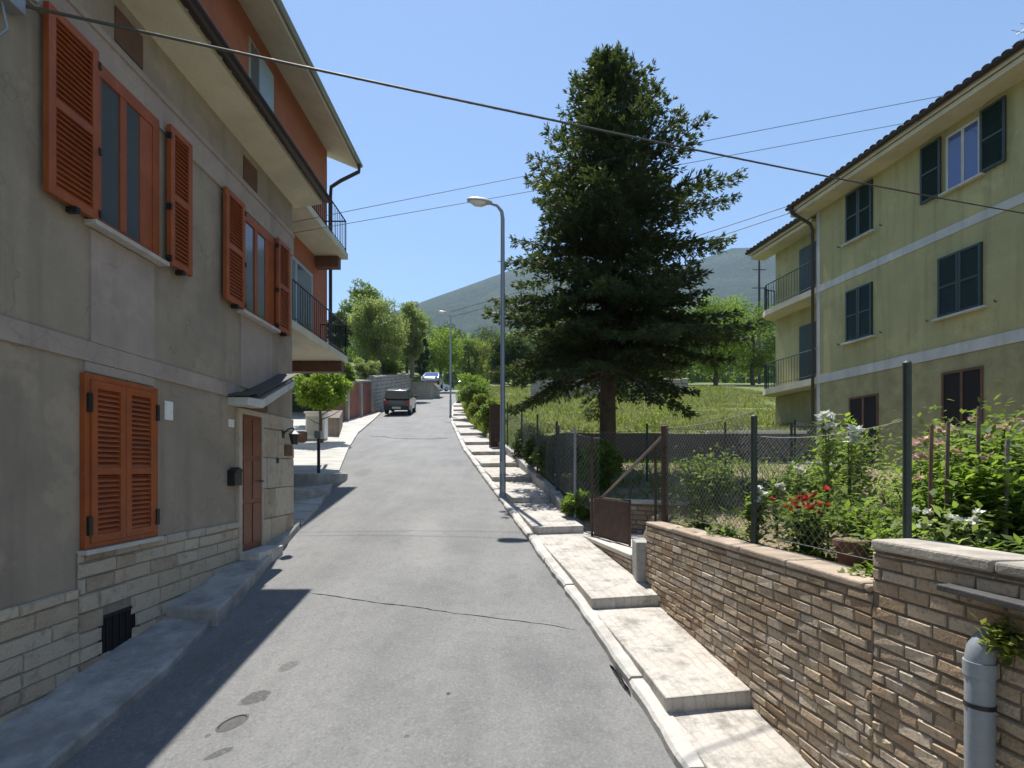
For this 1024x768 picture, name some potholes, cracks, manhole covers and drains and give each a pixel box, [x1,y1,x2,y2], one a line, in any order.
manhole cover [215,714,249,732]
